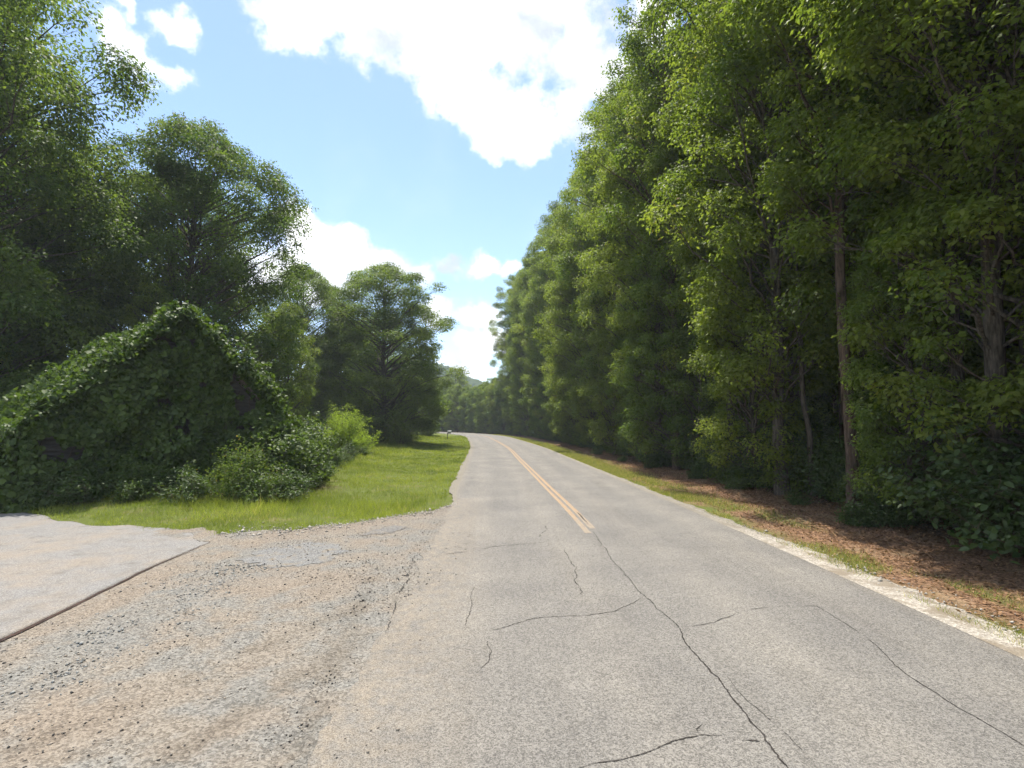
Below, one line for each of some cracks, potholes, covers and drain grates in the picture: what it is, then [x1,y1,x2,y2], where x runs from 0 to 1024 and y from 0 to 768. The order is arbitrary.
crack [491,513,811,768]
crack [385,556,415,632]
crack [817,606,1024,746]
